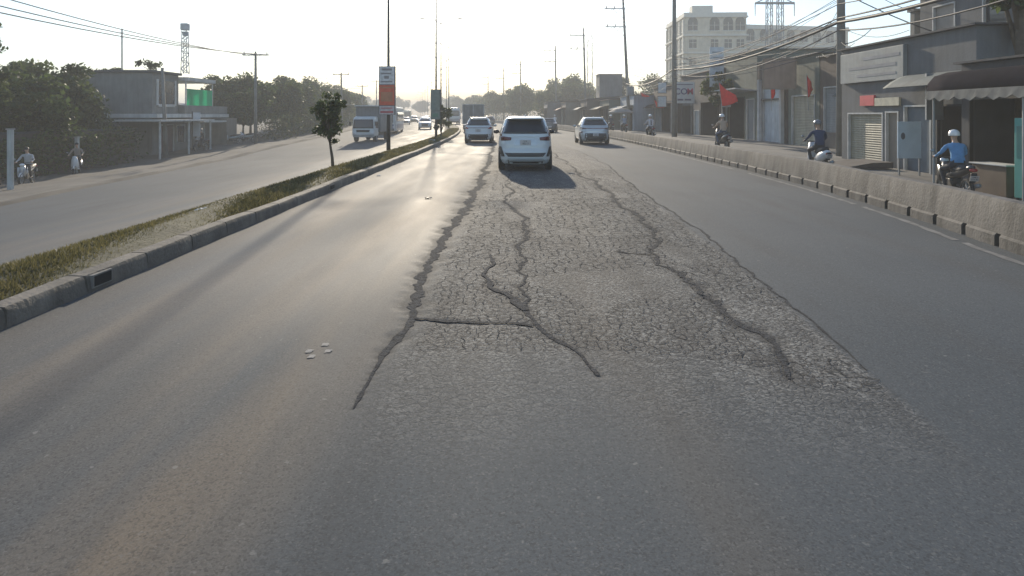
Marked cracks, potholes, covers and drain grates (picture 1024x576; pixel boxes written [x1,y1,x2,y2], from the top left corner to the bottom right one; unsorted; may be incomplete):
crack [353,140,881,408]
drain grate [88,268,112,289]
